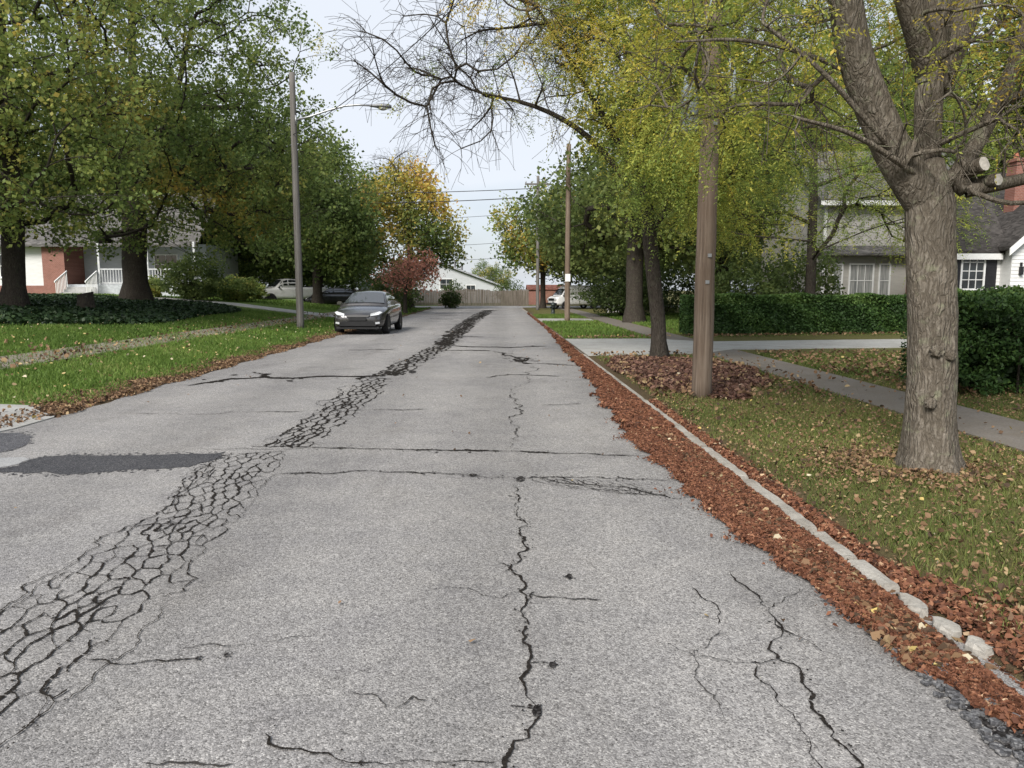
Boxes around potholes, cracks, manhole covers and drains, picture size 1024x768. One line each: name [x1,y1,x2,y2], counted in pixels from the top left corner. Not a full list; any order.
crack [0,448,681,768]
crack [117,310,647,456]
crack [663,571,864,768]
